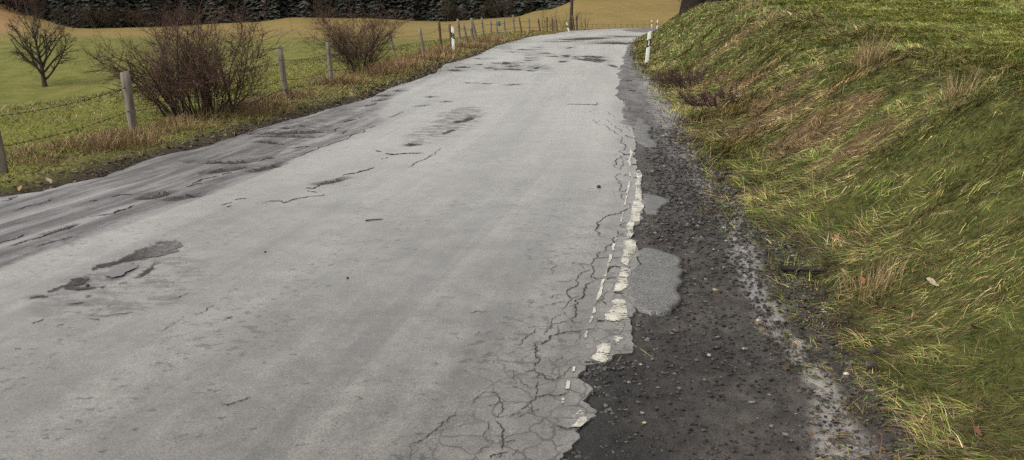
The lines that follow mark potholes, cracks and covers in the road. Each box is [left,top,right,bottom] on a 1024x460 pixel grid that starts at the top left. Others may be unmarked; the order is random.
crack [343,147,442,175]
crack [410,80,639,458]
pothole [47,239,183,292]
